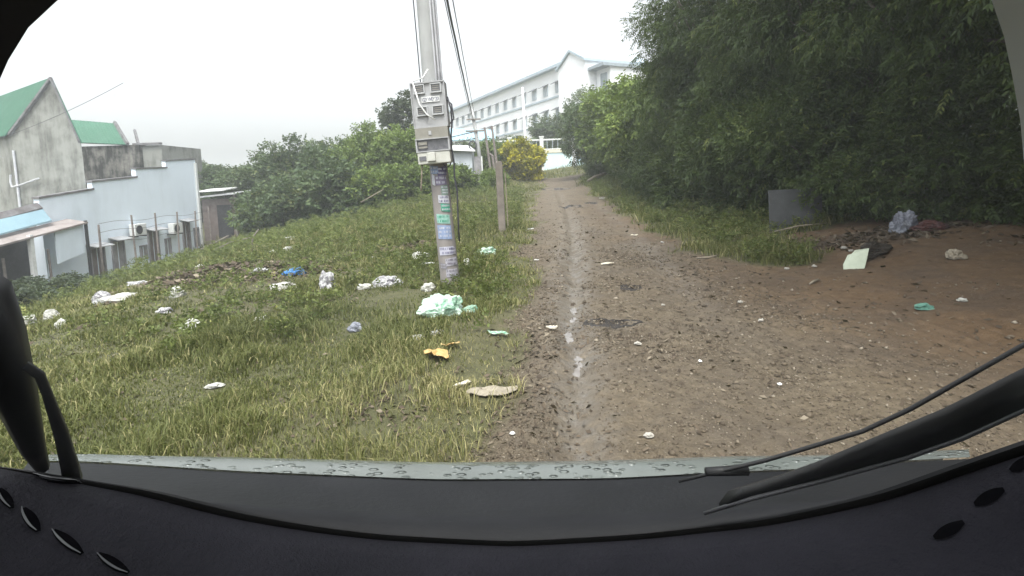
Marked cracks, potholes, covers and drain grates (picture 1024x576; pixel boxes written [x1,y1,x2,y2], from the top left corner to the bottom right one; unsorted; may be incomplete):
pothole [582,318,643,329]
